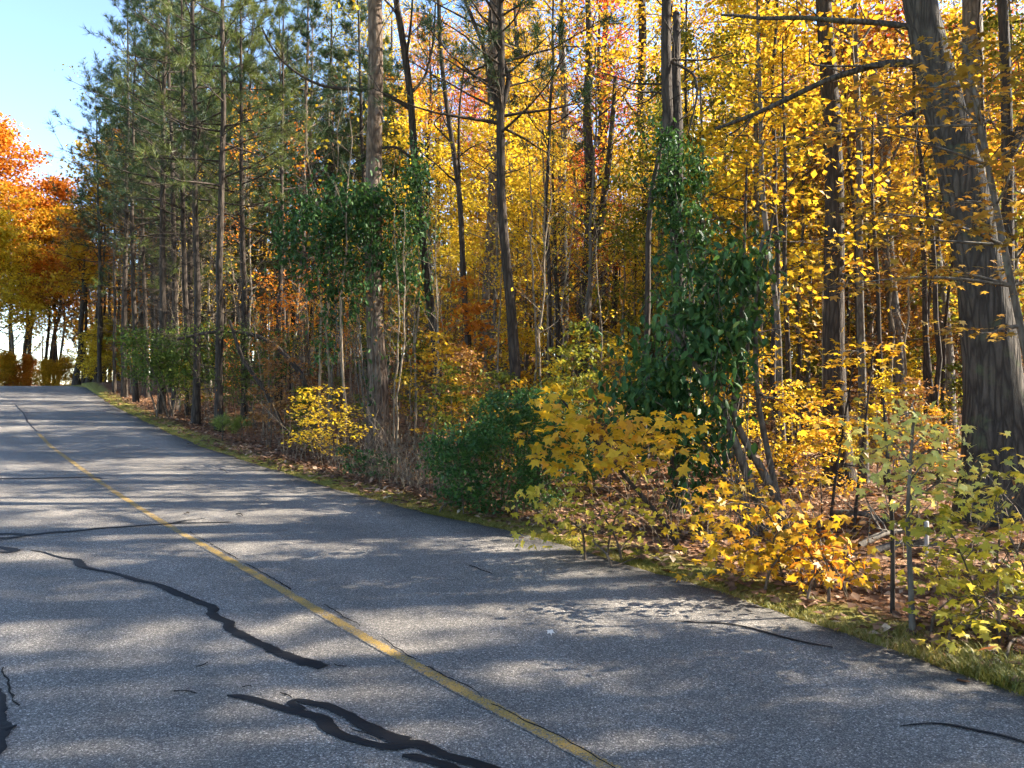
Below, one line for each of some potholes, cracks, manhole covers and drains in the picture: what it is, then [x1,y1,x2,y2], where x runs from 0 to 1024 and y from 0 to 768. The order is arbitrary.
crack [1,667,20,706]
crack [676,620,832,647]
